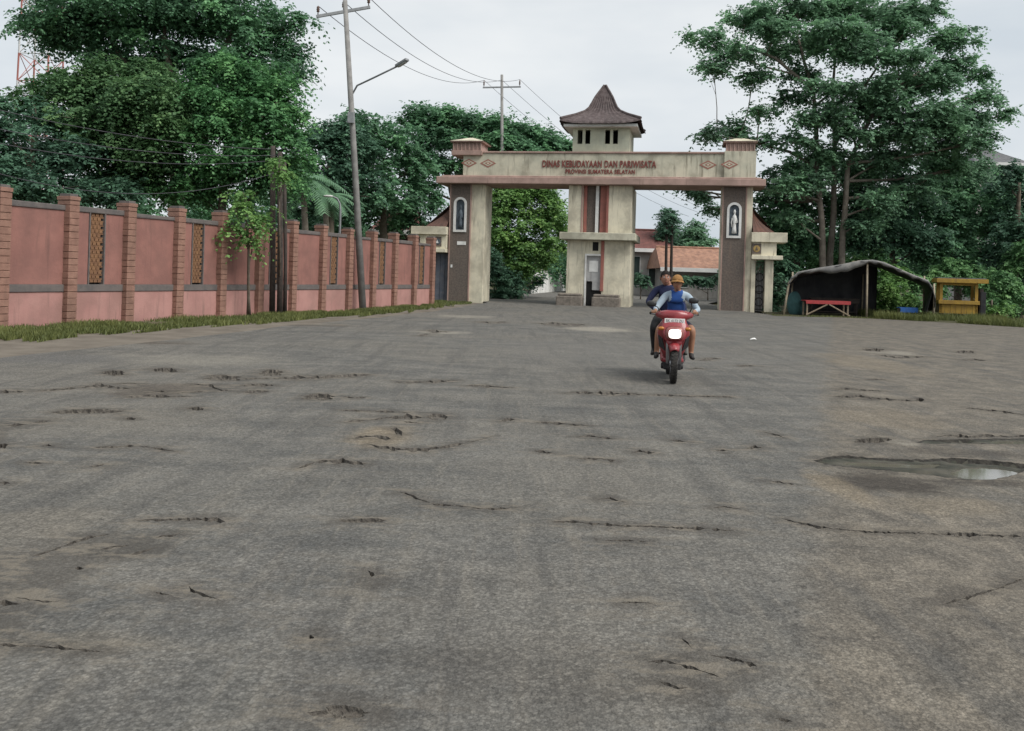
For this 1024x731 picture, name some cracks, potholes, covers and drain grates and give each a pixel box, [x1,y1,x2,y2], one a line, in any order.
crack [782,518,1024,538]
crack [189,587,219,600]
crack [554,520,732,542]
crack [401,492,518,510]
pothole [814,455,1024,480]
crack [34,517,225,556]
crack [945,579,1022,604]
crack [297,396,516,469]
crack [648,639,756,689]
crack [832,379,910,401]
